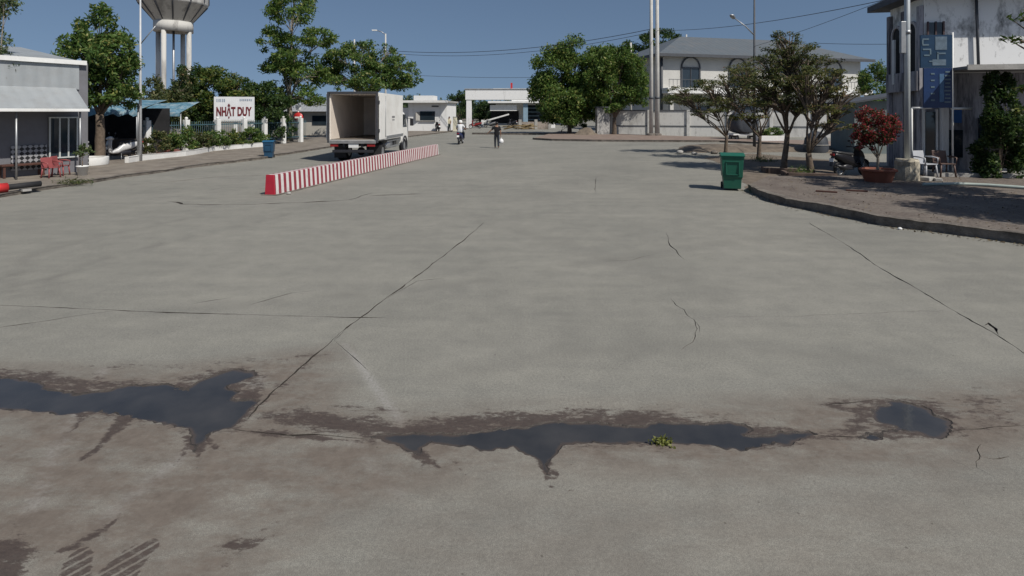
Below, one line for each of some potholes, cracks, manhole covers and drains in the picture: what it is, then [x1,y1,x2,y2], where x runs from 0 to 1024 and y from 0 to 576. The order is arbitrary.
crack [4,290,381,327]
crack [144,175,406,205]
